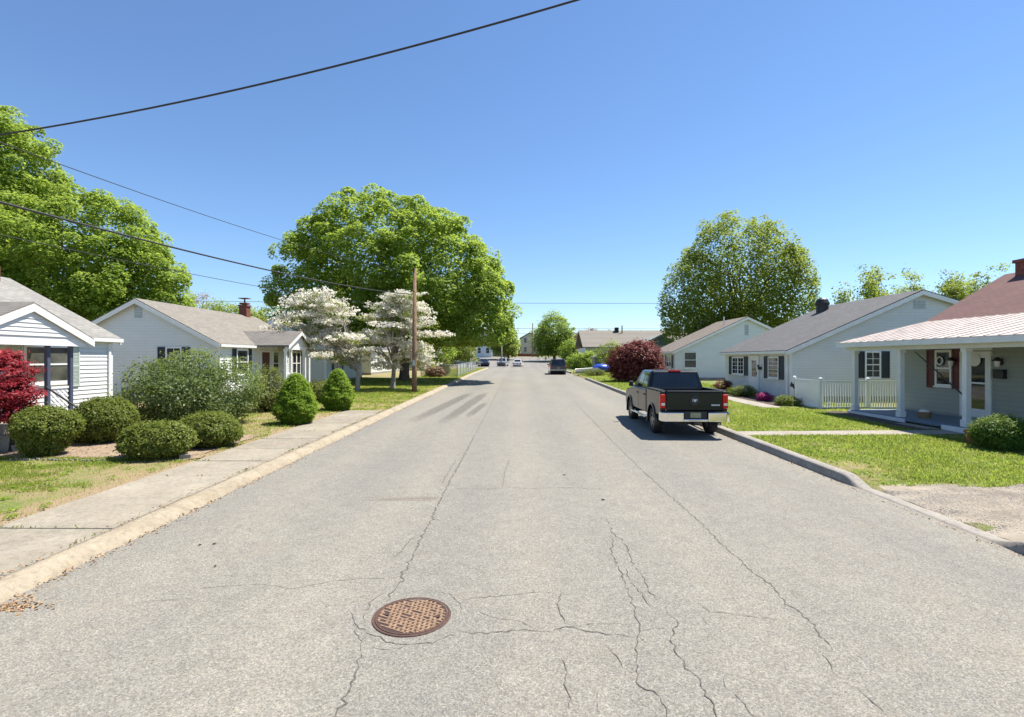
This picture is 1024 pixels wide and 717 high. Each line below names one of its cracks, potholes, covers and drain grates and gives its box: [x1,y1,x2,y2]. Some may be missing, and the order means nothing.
manhole cover [371,597,451,637]
crack [201,528,753,716]
